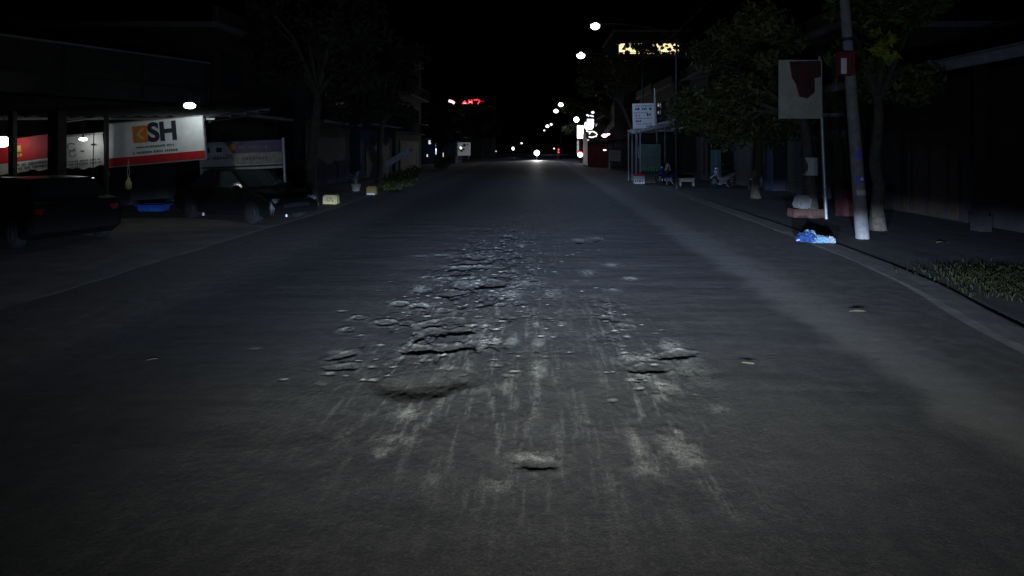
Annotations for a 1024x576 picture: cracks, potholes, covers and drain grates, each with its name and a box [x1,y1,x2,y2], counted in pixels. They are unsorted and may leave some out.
pothole [410,324,476,343]
pothole [510,456,559,471]
pothole [628,363,669,374]
pothole [399,341,479,355]
pothole [651,348,699,360]
pothole [325,349,360,361]
pothole [417,317,468,330]
pothole [450,279,508,291]
pothole [368,368,482,403]
pothole [321,363,360,371]
